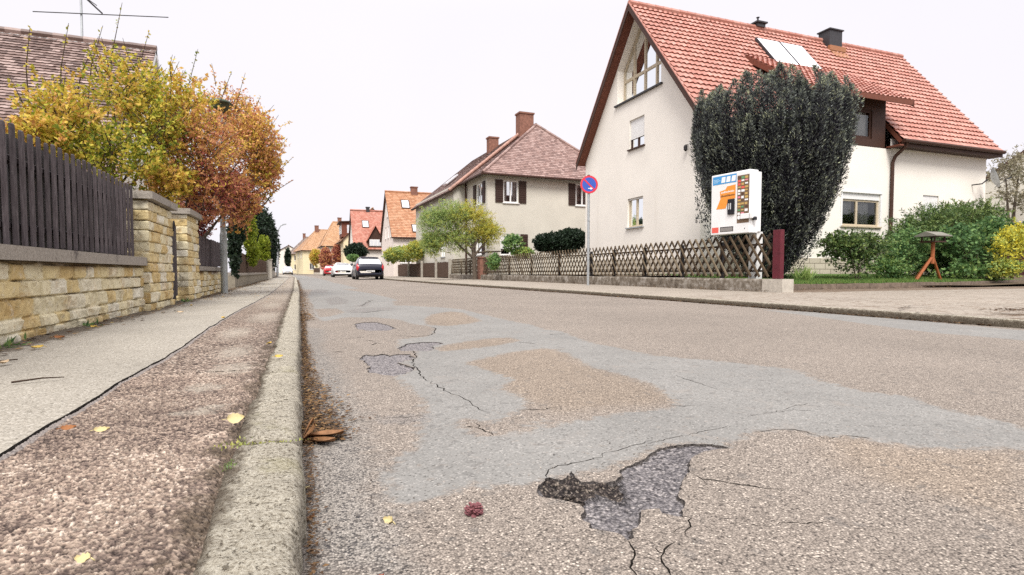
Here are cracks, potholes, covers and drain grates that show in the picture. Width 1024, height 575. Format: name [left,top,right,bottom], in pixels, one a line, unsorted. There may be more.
pothole [537,444,728,540]
crack [691,473,780,490]
pothole [397,342,443,351]
crack [629,516,692,575]
pothole [354,322,396,331]
crack [337,327,494,436]
pothole [360,354,416,376]
